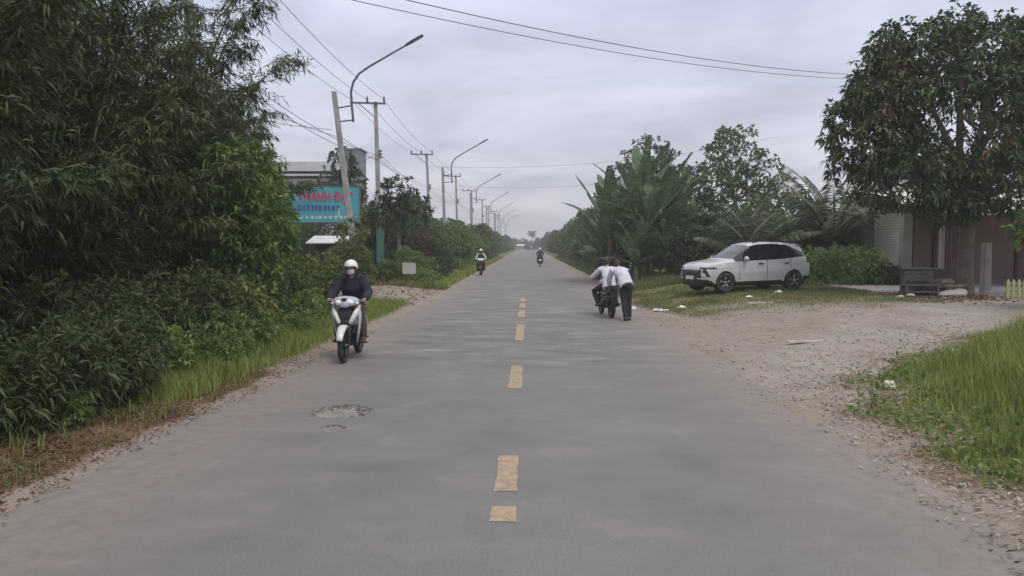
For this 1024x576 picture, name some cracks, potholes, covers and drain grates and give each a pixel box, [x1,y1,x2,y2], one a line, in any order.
pothole [307,404,373,418]
